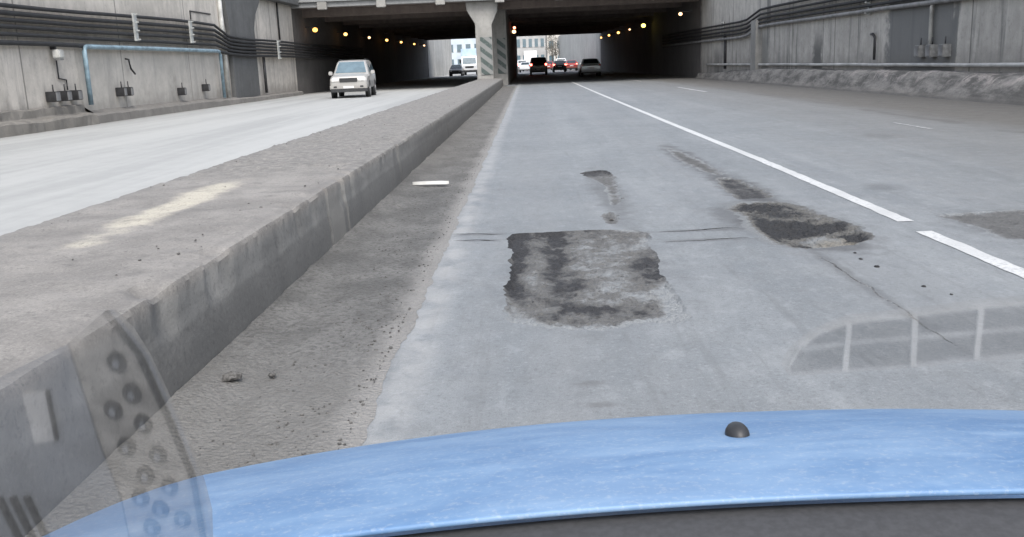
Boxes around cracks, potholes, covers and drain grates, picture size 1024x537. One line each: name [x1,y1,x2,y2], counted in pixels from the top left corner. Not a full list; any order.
pothole [580,170,623,205]
pothole [600,212,620,224]
pothole [724,201,875,249]
crack [816,255,955,345]
